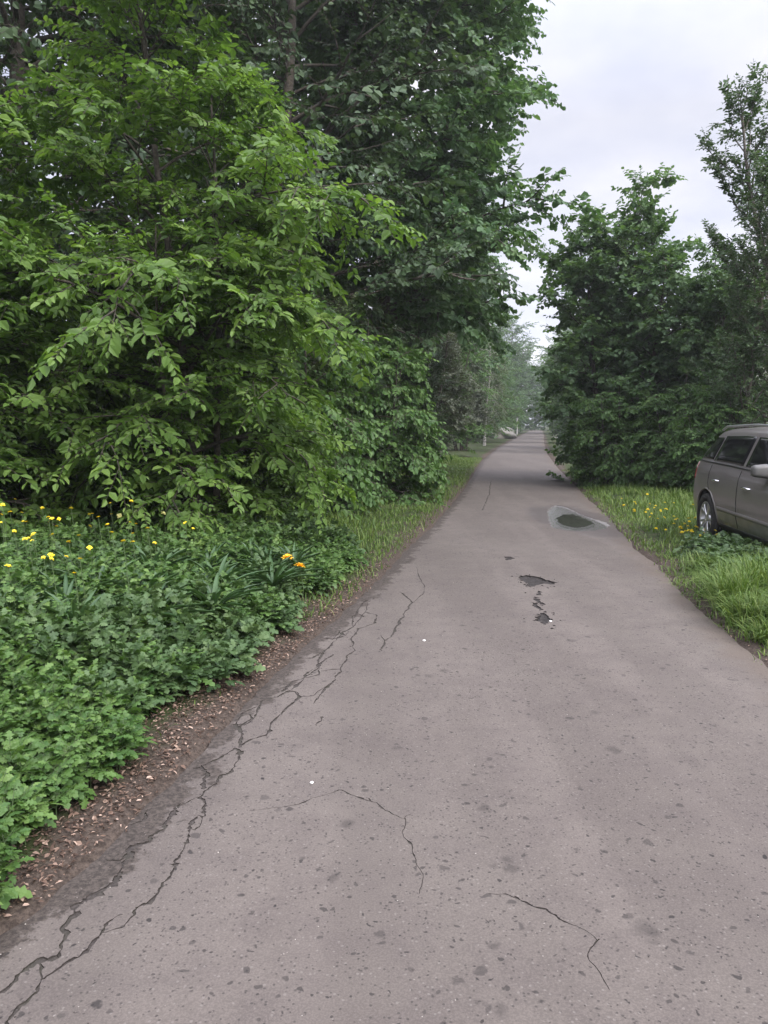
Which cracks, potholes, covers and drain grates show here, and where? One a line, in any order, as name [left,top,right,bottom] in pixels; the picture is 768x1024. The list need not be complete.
crack [488,893,610,990]
crack [0,567,425,1024]
pothole [522,611,561,629]
pothole [511,574,558,593]
pothole [547,505,611,531]
